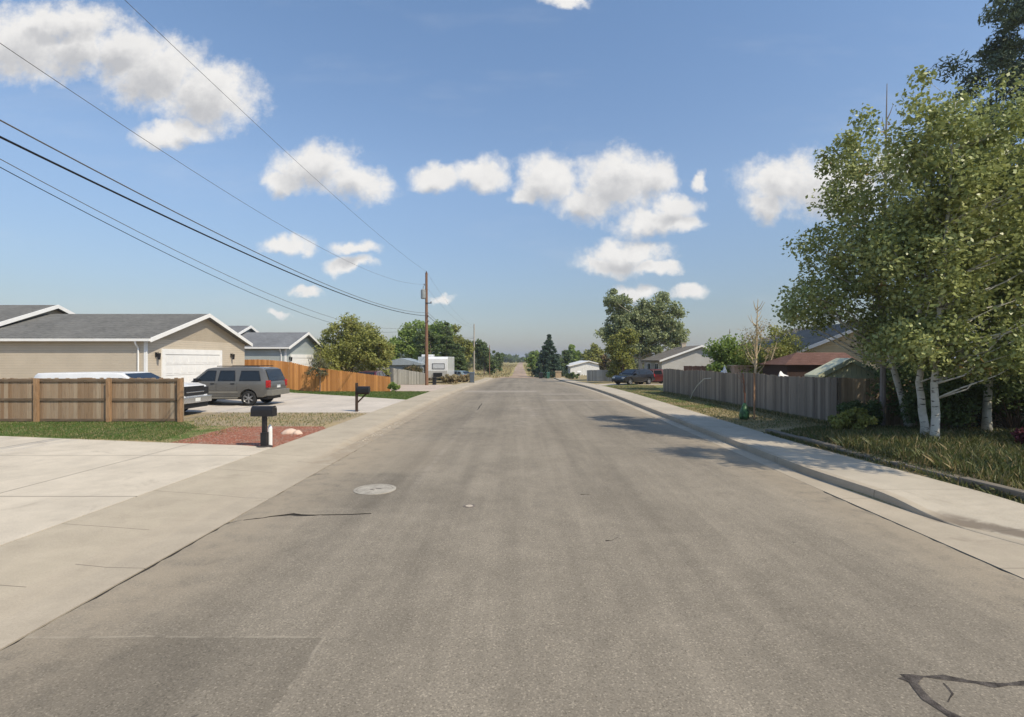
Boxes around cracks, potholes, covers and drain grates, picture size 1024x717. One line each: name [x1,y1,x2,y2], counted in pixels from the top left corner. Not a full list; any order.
manhole cover [353,484,396,495]
